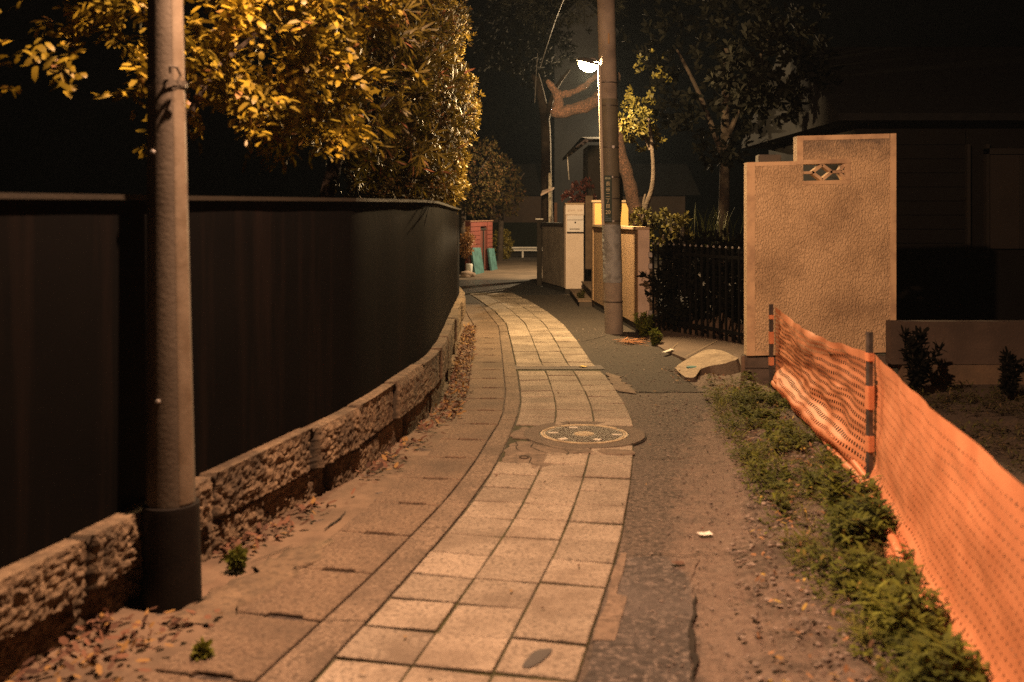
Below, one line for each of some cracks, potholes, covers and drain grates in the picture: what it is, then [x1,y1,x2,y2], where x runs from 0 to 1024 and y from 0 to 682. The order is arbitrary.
manhole cover [523,421,647,450]
crack [687,594,699,682]
